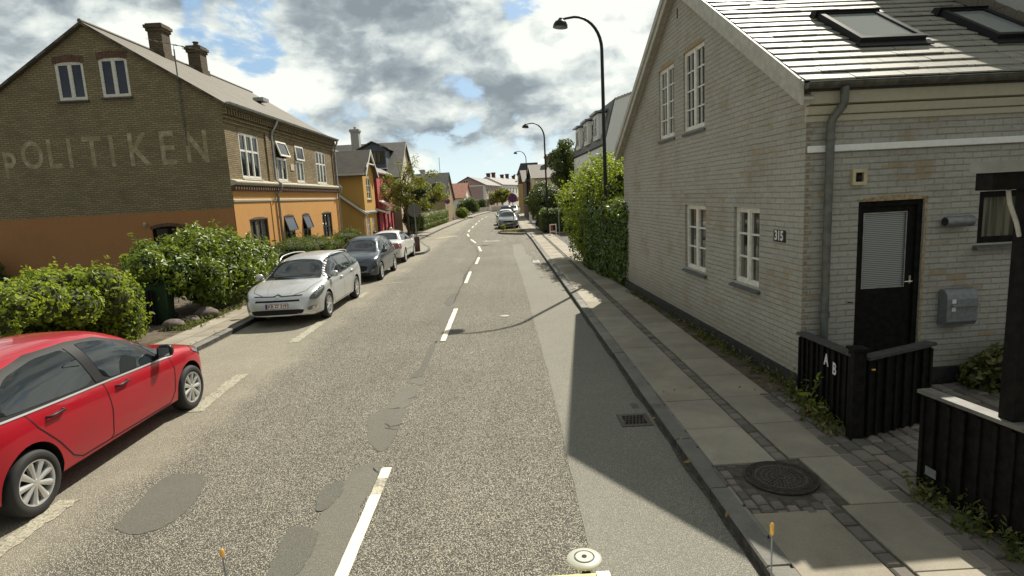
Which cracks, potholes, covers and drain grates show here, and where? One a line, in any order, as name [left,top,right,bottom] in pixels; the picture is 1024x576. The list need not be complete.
drain grate [616,413,654,427]
manhole cover [743,461,820,495]
